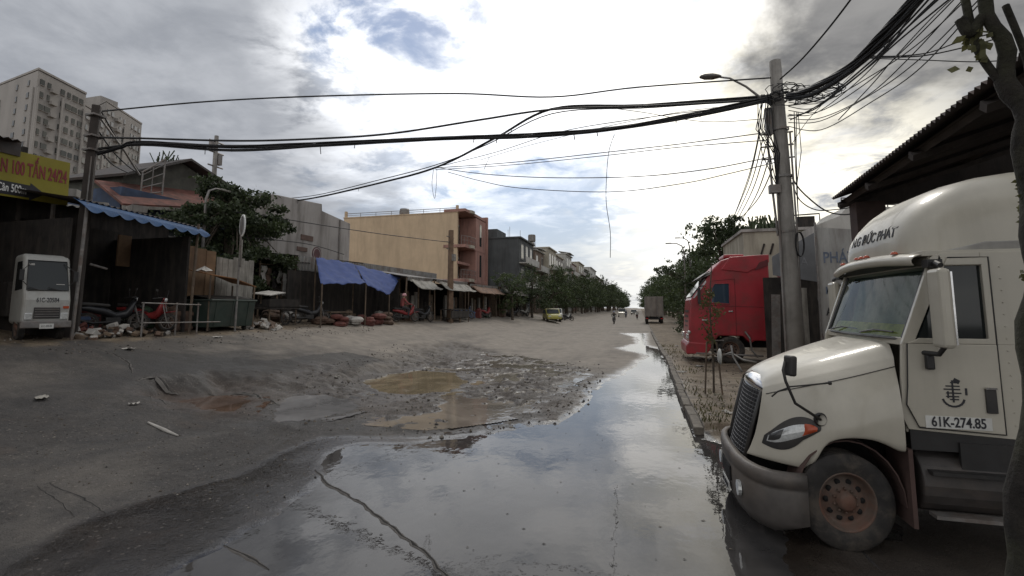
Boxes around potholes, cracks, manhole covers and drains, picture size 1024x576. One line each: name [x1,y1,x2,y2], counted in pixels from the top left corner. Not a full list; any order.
crack [315,470,451,576]
crack [37,482,105,517]
crack [97,348,179,405]
pothole [290,337,613,440]
crack [223,545,269,570]
pothole [165,391,271,413]
